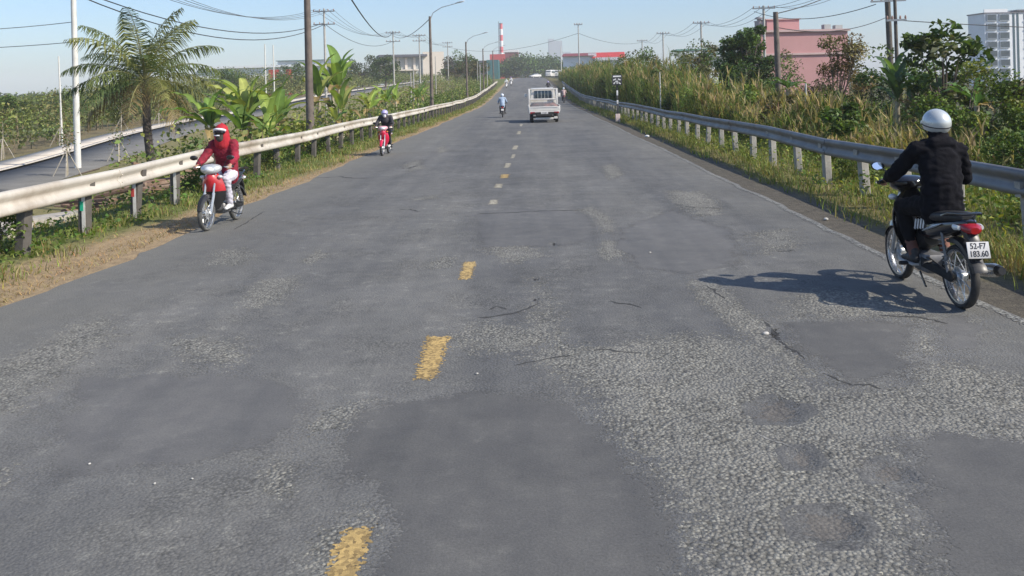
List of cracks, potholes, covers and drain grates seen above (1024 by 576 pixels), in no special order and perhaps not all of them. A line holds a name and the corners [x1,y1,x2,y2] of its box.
crack [480,303,539,318]
crack [765,322,805,359]
crack [883,315,947,324]
pothole [793,452,812,467]
crack [826,374,881,389]
pothole [800,513,857,541]
pothole [755,401,796,423]
